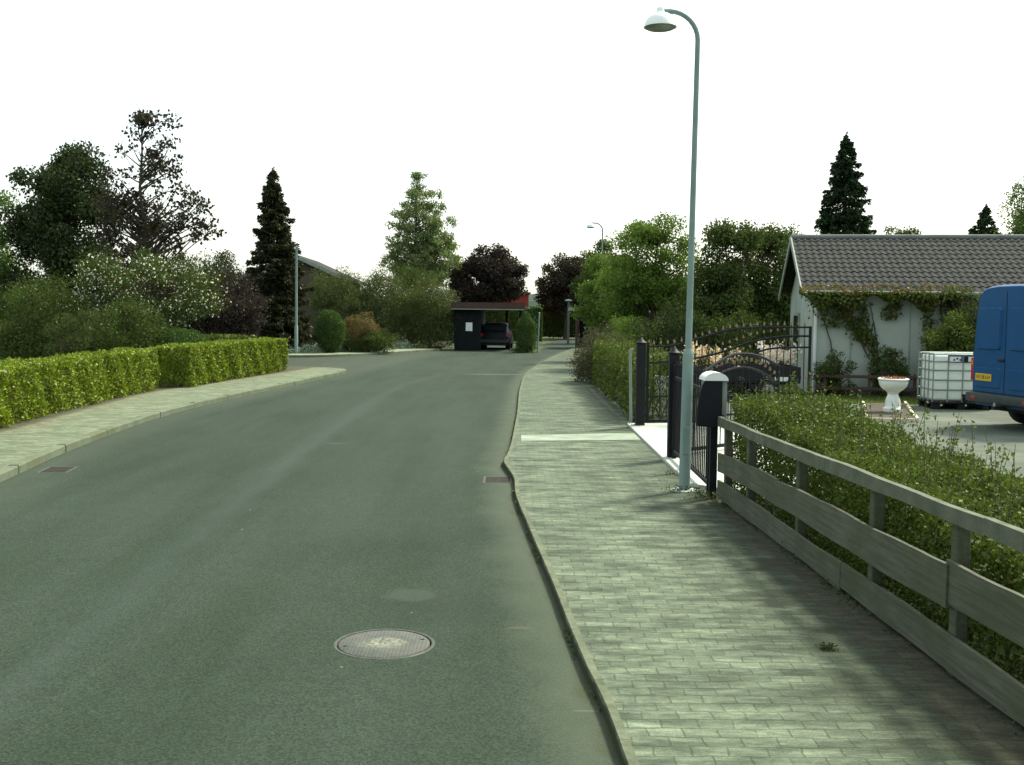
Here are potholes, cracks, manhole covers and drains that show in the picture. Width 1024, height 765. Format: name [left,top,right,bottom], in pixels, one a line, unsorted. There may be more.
manhole cover [333,629,435,660]
